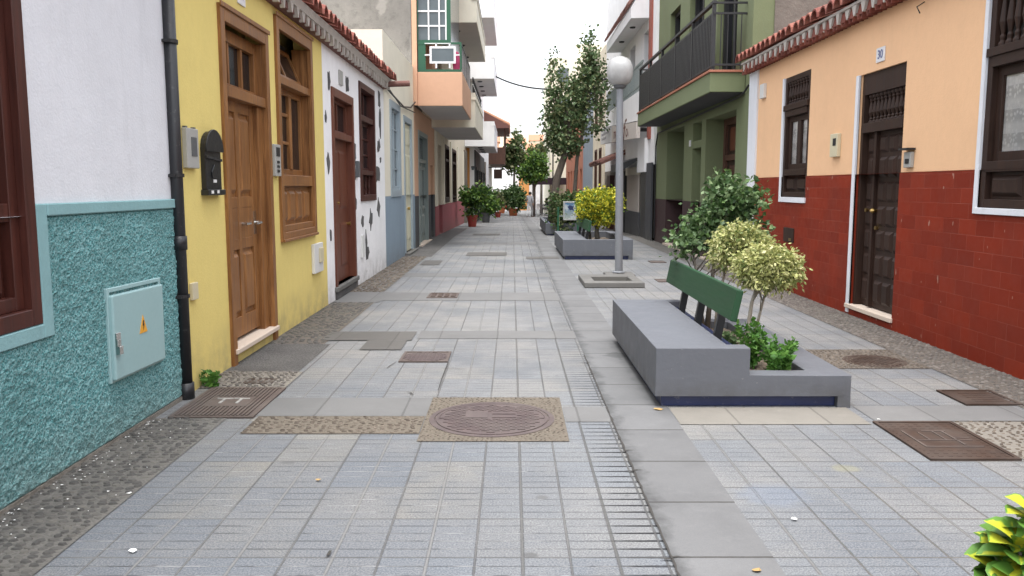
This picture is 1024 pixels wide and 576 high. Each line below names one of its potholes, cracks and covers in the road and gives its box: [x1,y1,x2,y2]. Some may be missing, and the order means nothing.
manhole cover [429,402,554,437]
manhole cover [842,355,907,368]
manhole cover [872,421,1022,461]
manhole cover [936,390,1023,406]
manhole cover [168,387,286,419]
manhole cover [398,351,452,363]
